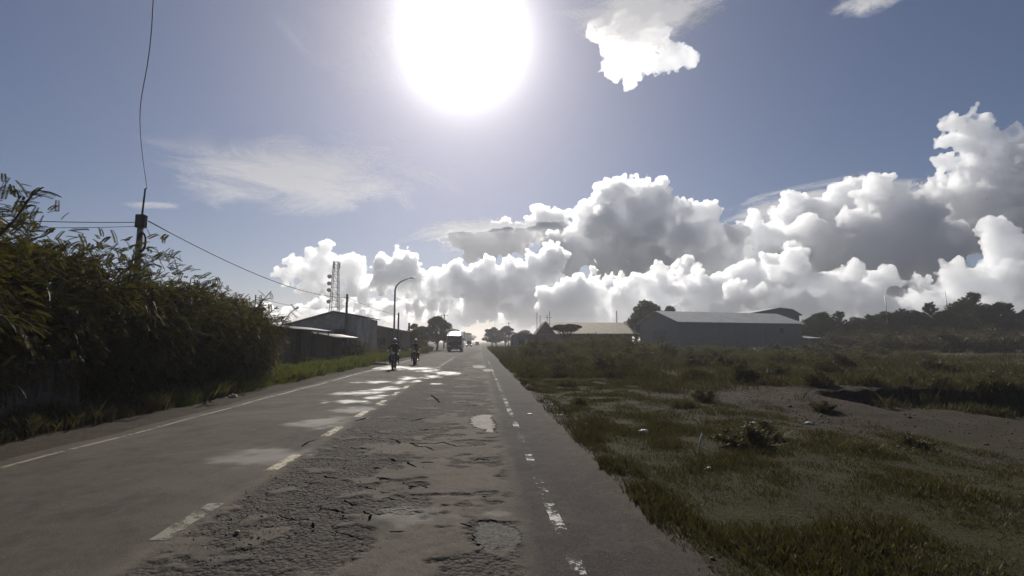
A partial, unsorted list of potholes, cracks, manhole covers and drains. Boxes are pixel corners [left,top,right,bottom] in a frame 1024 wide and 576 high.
crack [278,486,403,540]
pothole [472,519,523,551]
crack [355,395,490,469]
